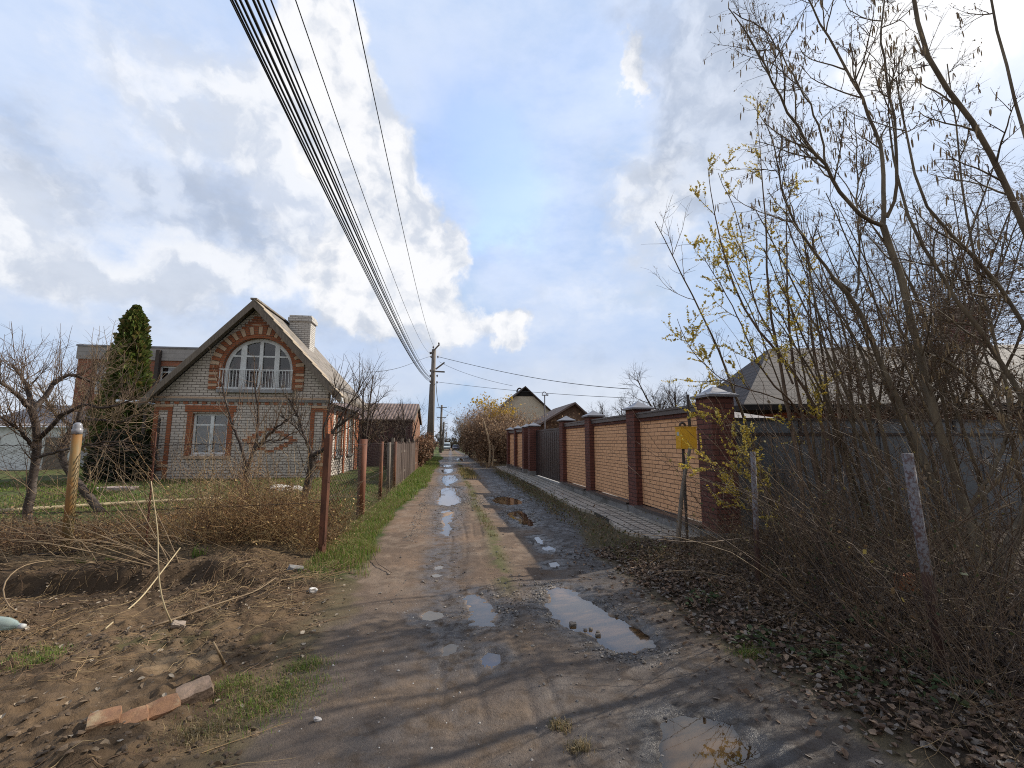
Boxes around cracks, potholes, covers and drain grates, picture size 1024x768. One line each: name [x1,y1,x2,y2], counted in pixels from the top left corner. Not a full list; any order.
pothole [535,582,664,658]
pothole [436,516,456,536]
pothole [489,495,526,505]
pothole [434,486,465,506]
pothole [436,640,464,659]
pothole [474,647,507,671]
pothole [505,508,539,527]
pothole [413,608,449,623]
pothole [458,589,508,630]
pothole [643,708,776,768]
pothole [436,509,459,527]
